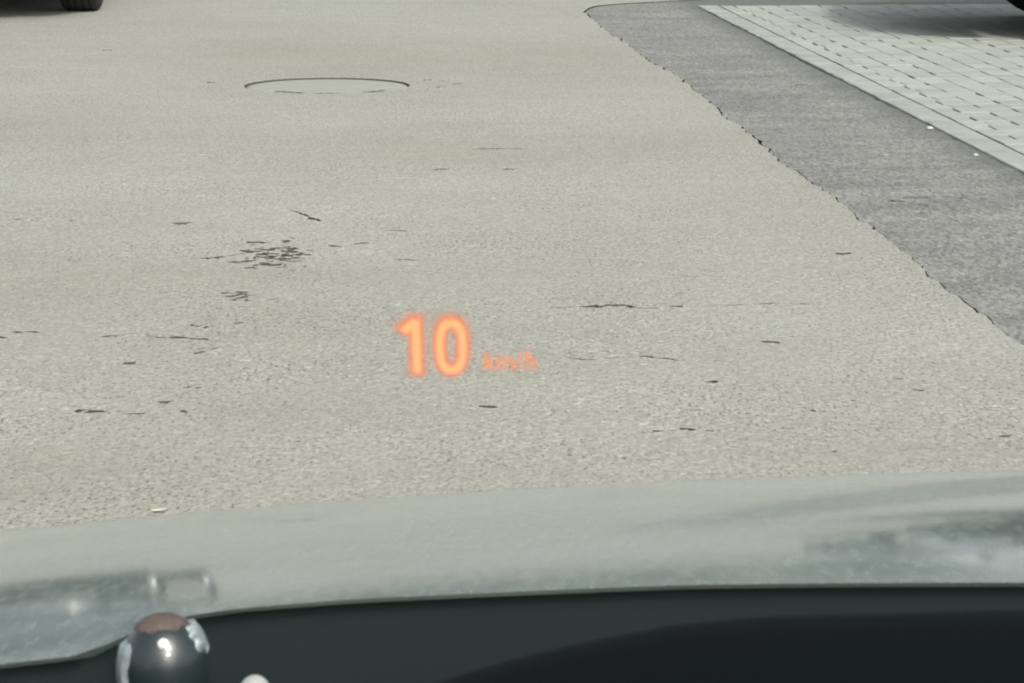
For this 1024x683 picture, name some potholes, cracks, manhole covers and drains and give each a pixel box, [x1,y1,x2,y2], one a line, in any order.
crack [201,238,367,271]
crack [148,323,218,354]
manhole cover [244,78,410,94]
